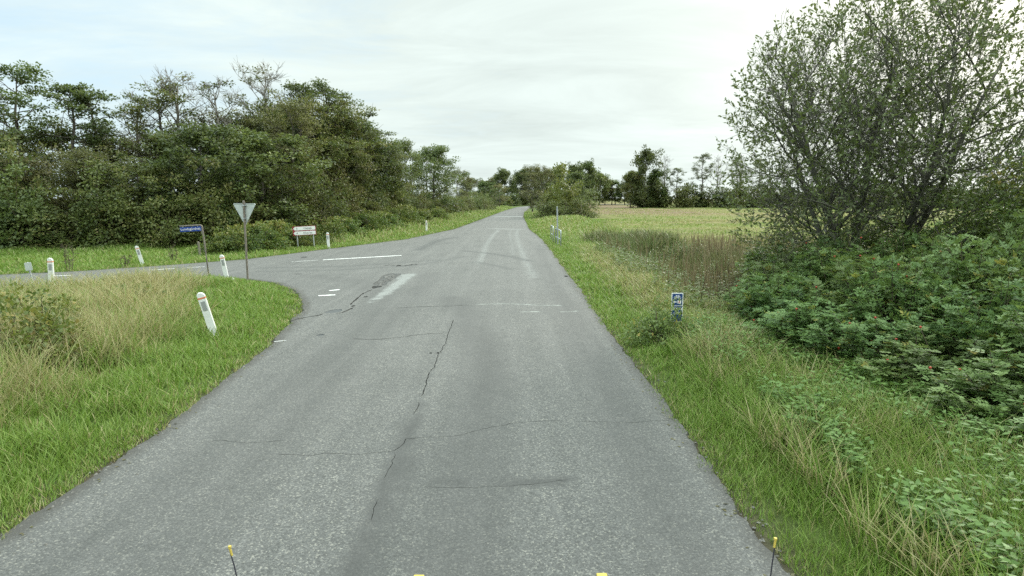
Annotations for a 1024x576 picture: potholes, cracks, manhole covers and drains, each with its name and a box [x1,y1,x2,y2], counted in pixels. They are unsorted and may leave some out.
crack [208,420,667,519]
crack [289,290,371,322]
crack [365,320,454,415]
